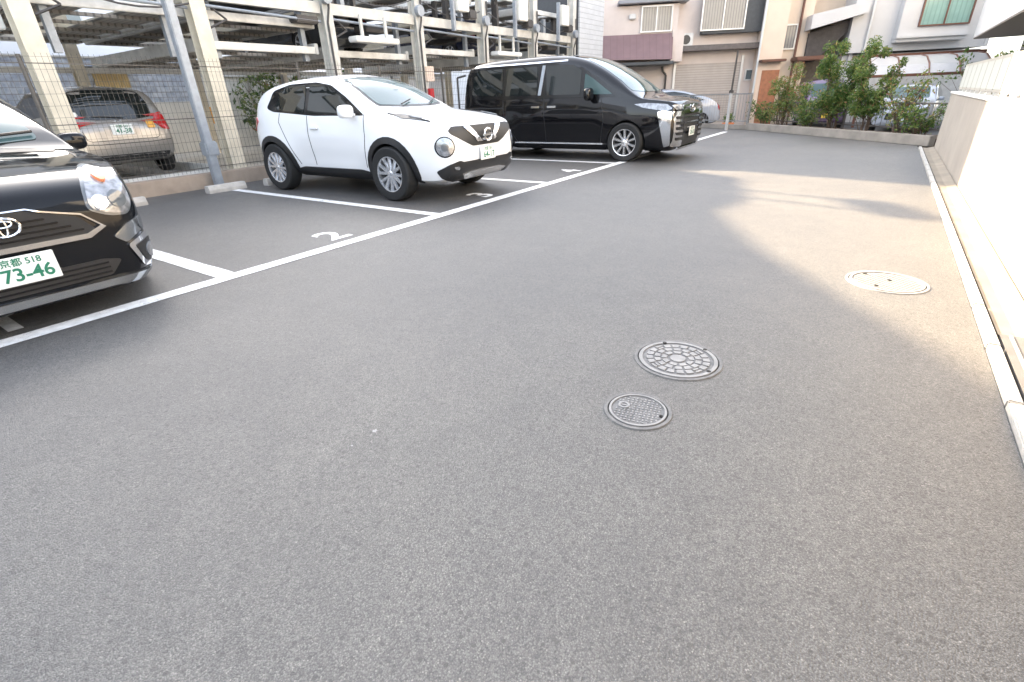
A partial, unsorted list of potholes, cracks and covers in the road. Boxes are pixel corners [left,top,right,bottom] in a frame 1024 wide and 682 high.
manhole cover [604,392,673,431]
manhole cover [845,270,930,295]
manhole cover [634,340,723,381]
